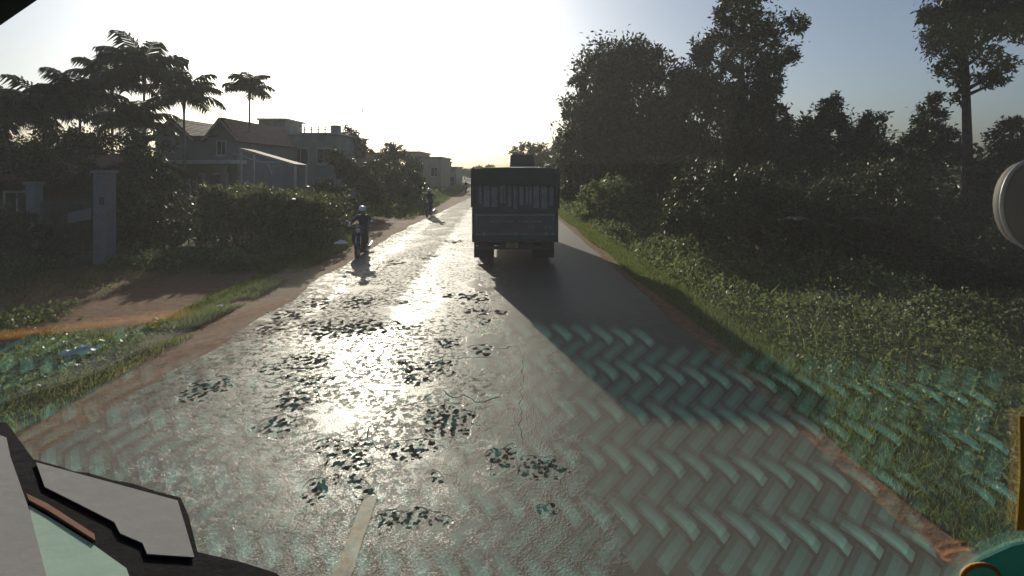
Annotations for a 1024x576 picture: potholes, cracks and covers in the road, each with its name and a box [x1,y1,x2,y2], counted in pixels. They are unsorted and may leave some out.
pothole [312,437,380,504]
pothole [416,403,478,440]
crack [365,390,499,445]
pothole [468,344,499,357]
pothole [400,374,435,388]
pothole [174,376,234,405]
pothole [386,358,457,377]
pothole [376,438,448,462]
pothole [452,290,491,305]
pothole [536,503,564,518]
pothole [375,506,455,536]
pothole [517,455,571,482]
